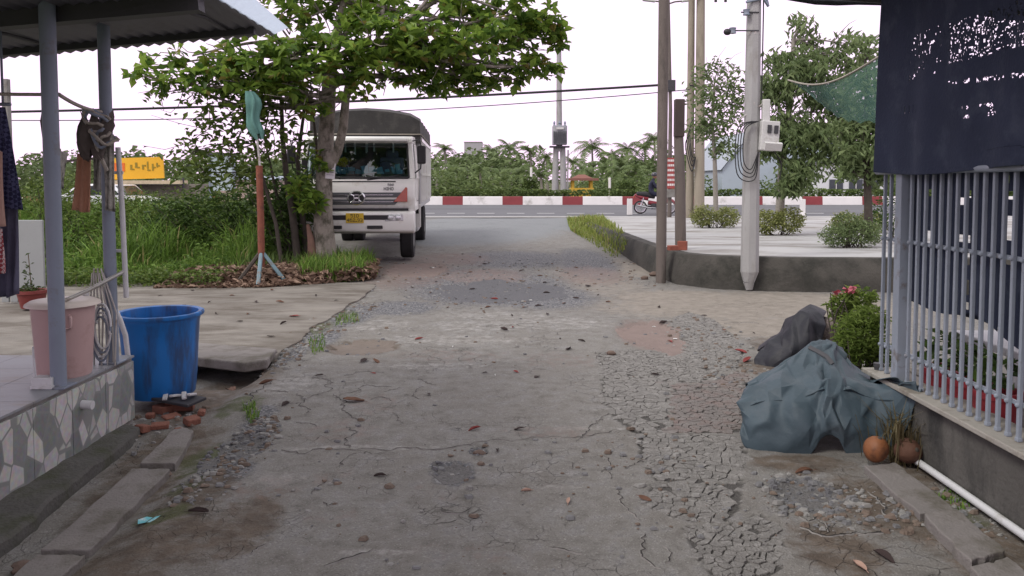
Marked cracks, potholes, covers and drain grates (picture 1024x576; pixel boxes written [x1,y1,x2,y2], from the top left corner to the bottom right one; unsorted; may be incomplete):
crack [576,312,895,576]
pothole [325,338,401,355]
crack [549,547,582,555]
crack [246,346,434,507]
pothole [766,476,846,513]
pothole [615,321,692,356]
